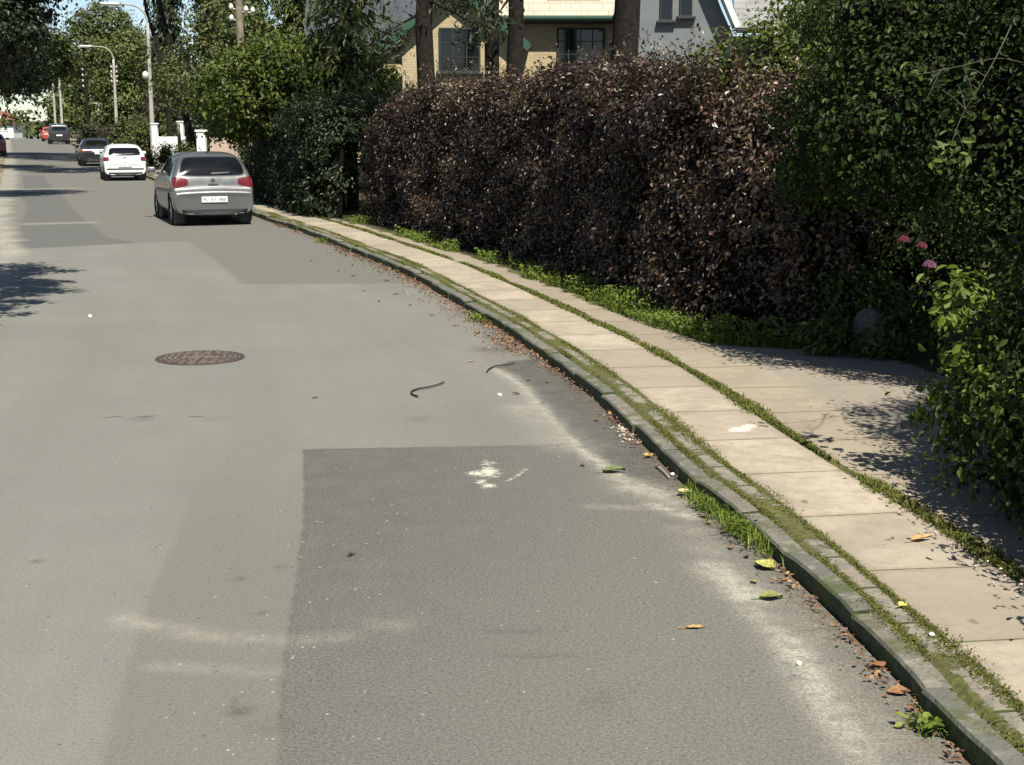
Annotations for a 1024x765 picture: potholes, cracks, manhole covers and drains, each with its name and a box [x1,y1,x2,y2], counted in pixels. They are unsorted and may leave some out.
manhole cover [155,350,245,366]
